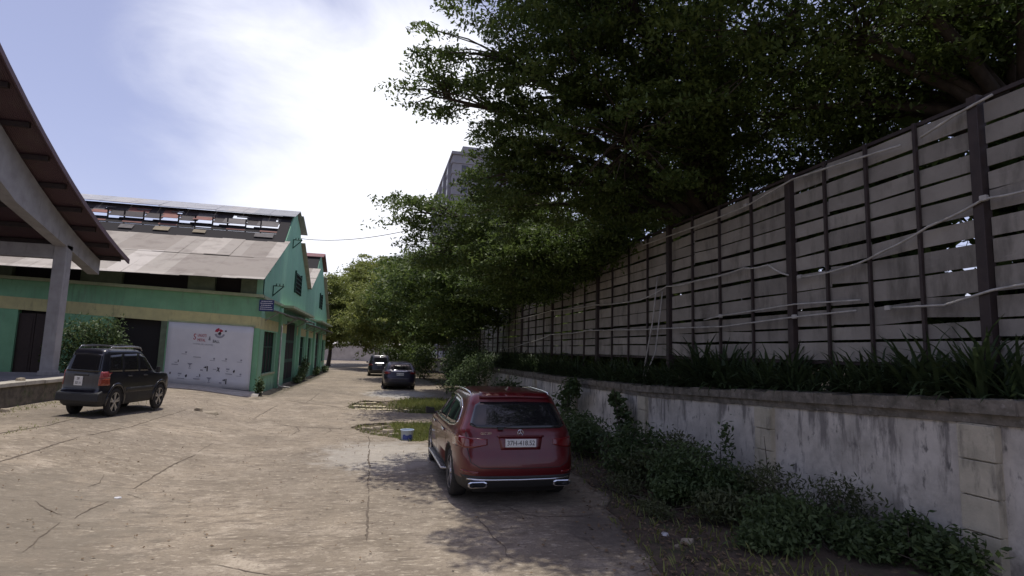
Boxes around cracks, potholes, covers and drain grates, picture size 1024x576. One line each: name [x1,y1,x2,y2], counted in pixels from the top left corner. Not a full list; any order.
crack [478,503,599,557]
crack [365,436,411,540]
crack [24,443,212,551]
crack [0,411,180,462]
crack [255,393,345,434]
